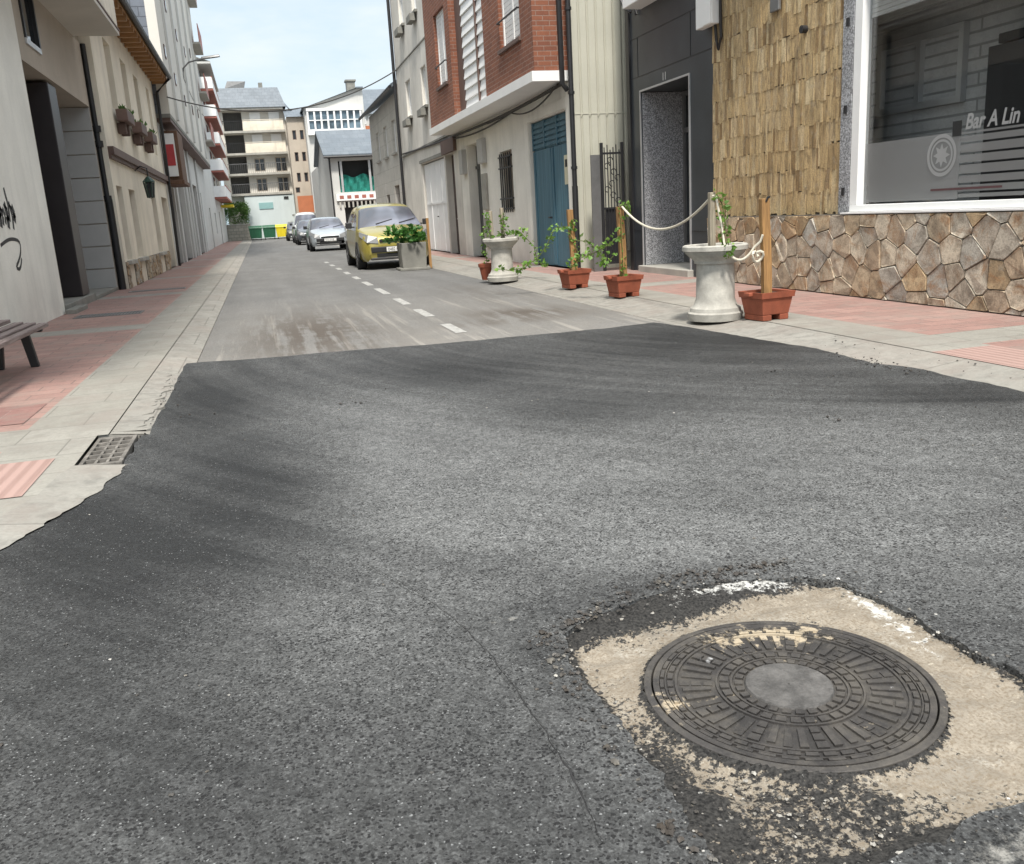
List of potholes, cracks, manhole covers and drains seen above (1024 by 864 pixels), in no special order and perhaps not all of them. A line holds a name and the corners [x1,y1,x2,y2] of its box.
drain grate [79,434,138,465]
manhole cover [644,621,949,775]
